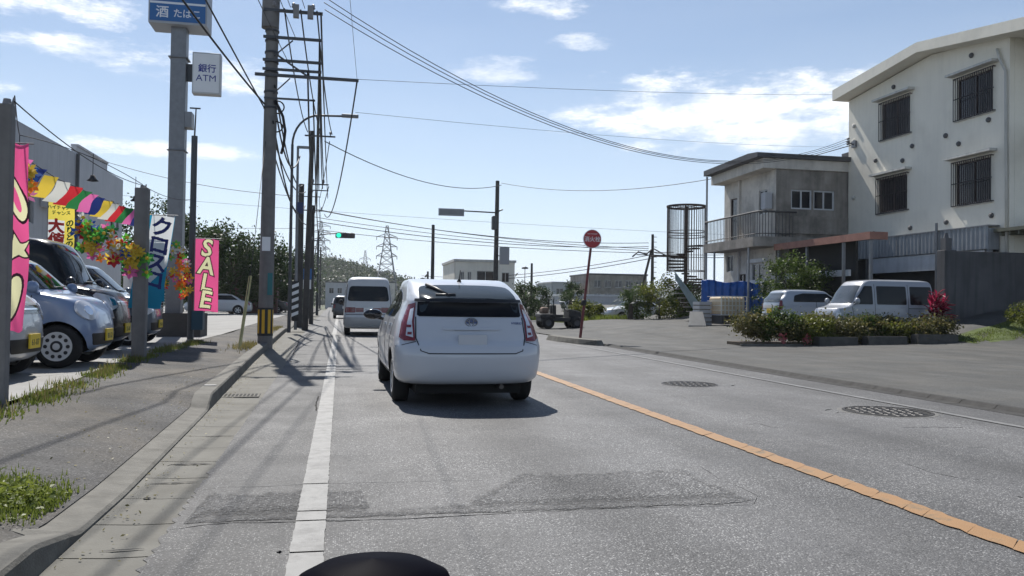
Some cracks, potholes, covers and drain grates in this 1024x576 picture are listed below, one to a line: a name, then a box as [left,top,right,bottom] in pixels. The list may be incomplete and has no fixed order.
manhole cover [837,406,940,418]
